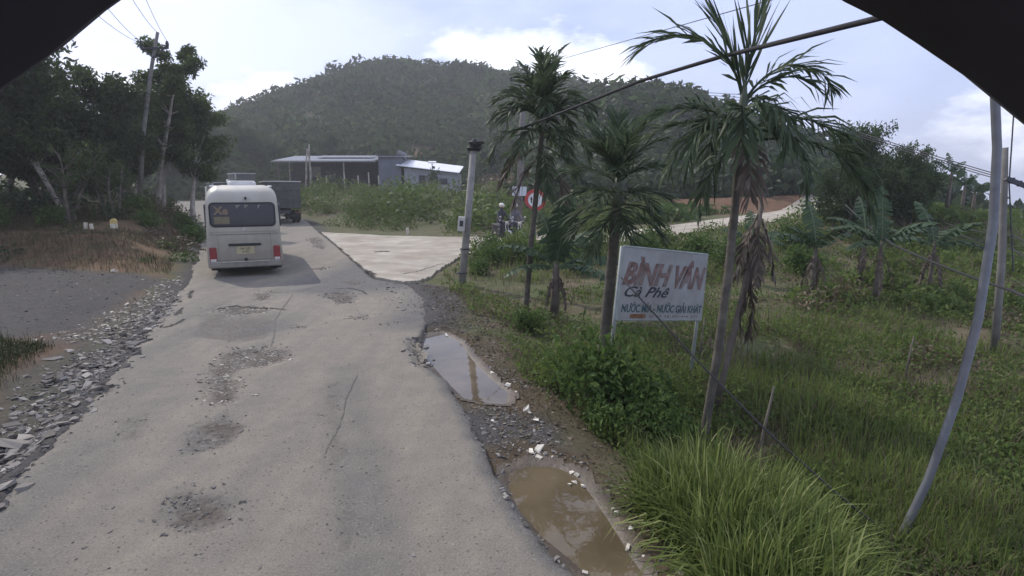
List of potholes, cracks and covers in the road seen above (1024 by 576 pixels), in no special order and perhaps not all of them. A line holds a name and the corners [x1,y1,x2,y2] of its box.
pothole [178,410,254,455]
crack [218,290,305,346]
pothole [418,331,519,406]
pothole [496,455,658,576]
crack [322,376,357,456]
pothole [195,343,292,406]
pothole [212,305,271,316]
pothole [142,481,246,543]
pothole [323,290,359,304]
